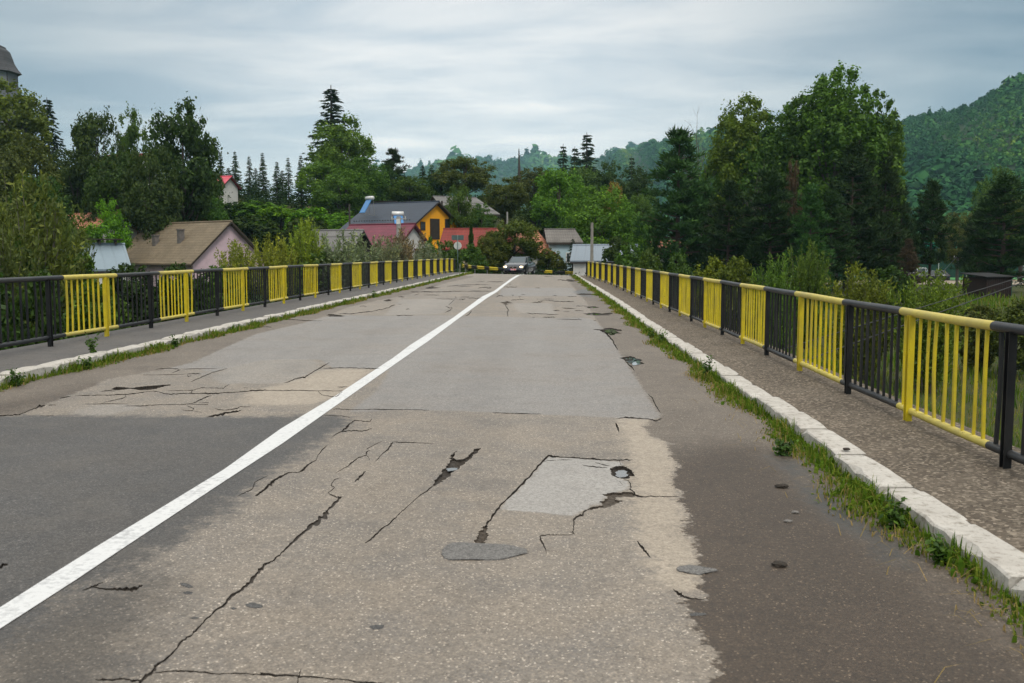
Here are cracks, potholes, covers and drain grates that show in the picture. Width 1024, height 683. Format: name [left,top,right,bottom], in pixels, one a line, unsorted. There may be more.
crack [0,362,379,417]
crack [484,455,679,558]
pothole [610,466,635,479]
crack [343,281,634,370]
crack [82,409,433,683]
